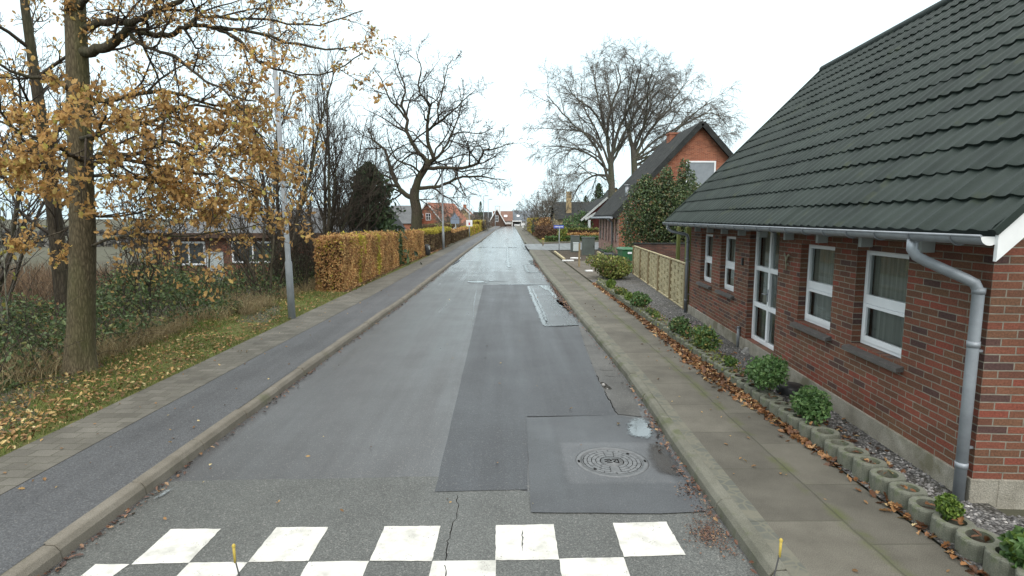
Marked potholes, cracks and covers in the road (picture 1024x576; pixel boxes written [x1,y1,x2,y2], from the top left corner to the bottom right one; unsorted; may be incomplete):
crack [444,496,459,576]
manhole cover [576,447,649,477]
